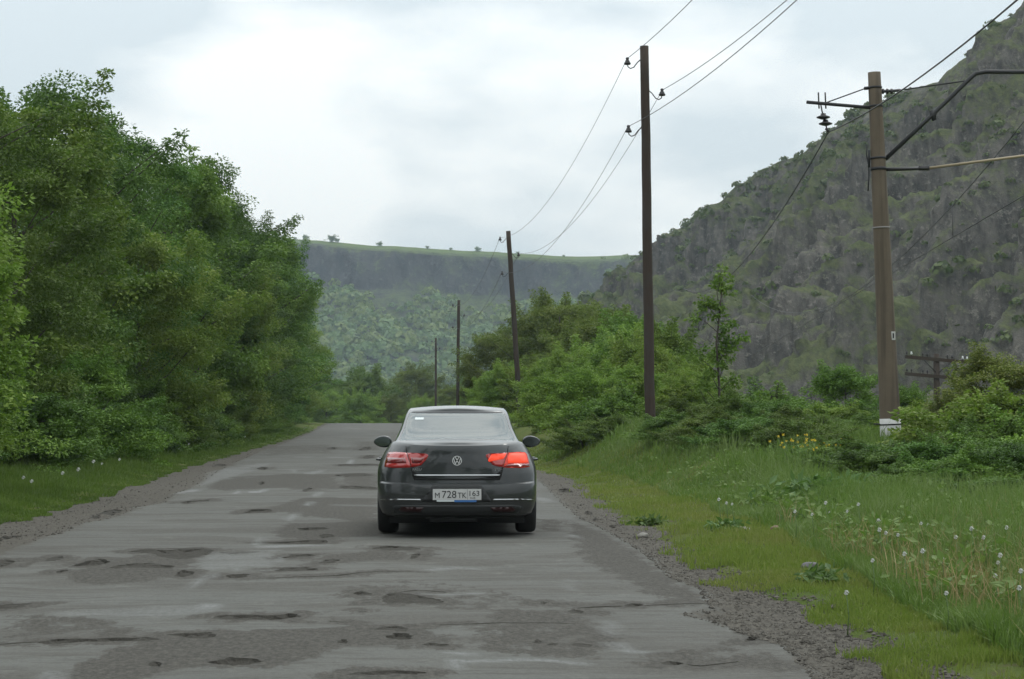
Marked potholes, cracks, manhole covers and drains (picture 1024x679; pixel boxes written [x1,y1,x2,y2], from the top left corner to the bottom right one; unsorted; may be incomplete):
pothole [131,547,214,559]
pothole [208,657,263,666]
pothole [381,592,444,604]
